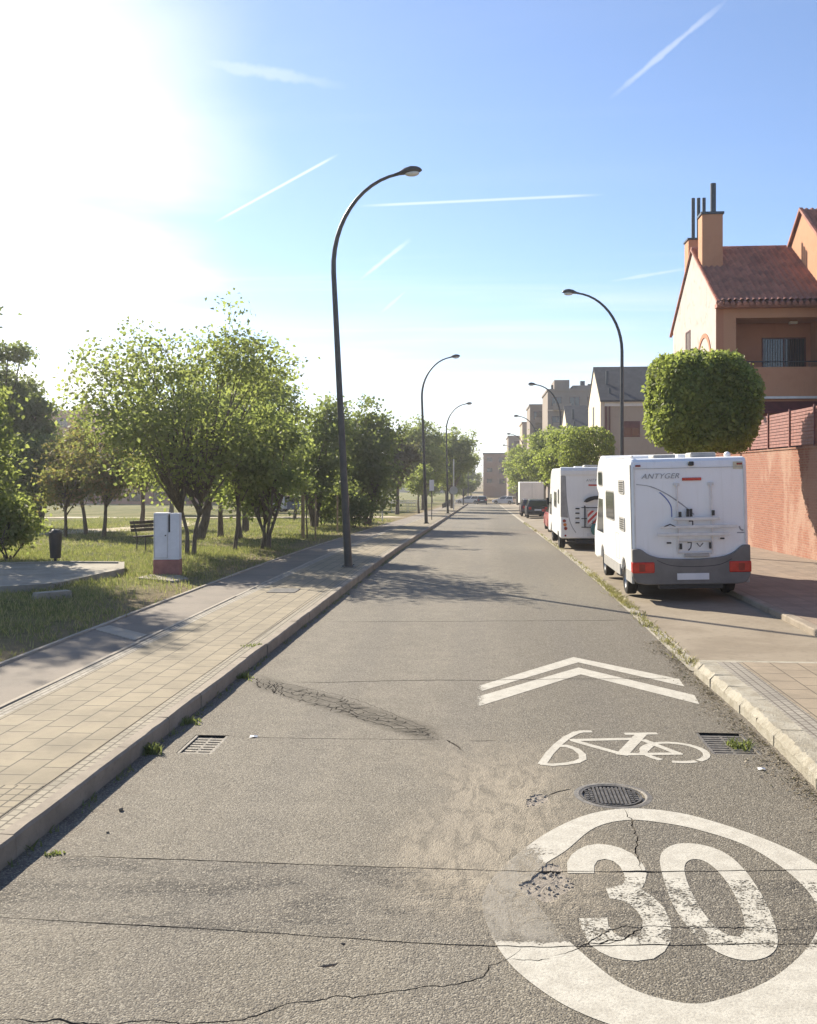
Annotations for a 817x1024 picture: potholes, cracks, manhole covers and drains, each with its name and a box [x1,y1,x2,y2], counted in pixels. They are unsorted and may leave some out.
manhole cover [574,783,652,809]
drain grate [177,735,228,754]
drain grate [696,733,762,755]
pothole [526,794,548,808]
crack [626,813,643,872]
crack [230,677,684,751]
crack [0,955,545,1024]
pothole [519,863,575,902]
